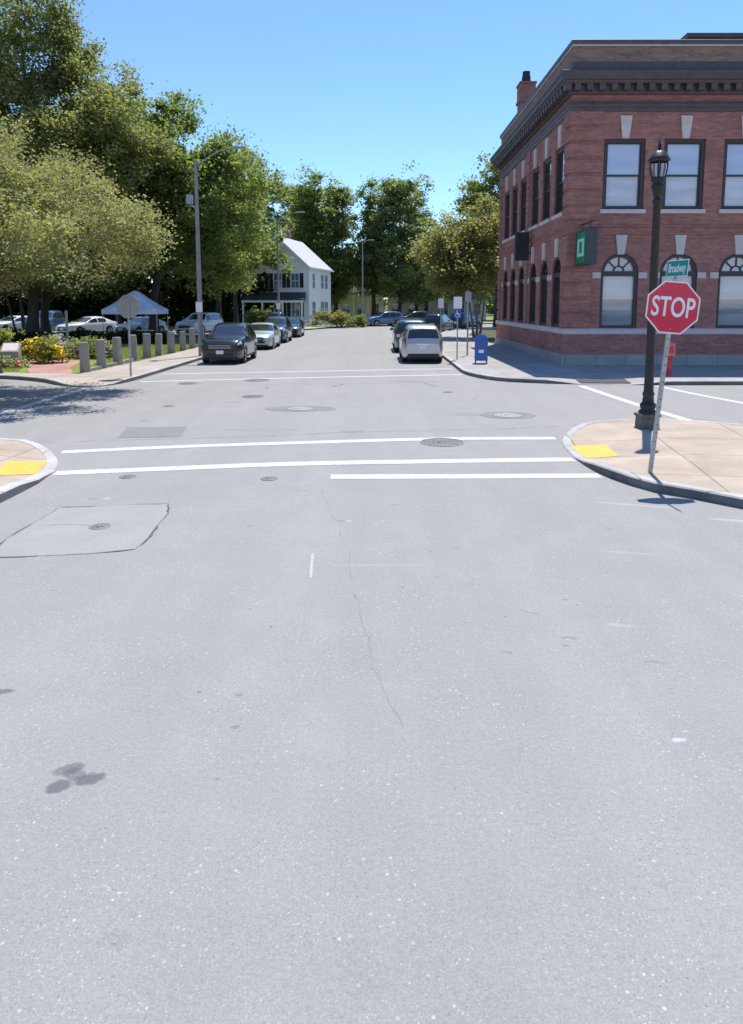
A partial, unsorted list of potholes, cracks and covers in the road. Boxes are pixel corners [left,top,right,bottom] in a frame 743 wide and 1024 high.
crack [321,489,404,727]
manhole cover [420,438,465,447]
